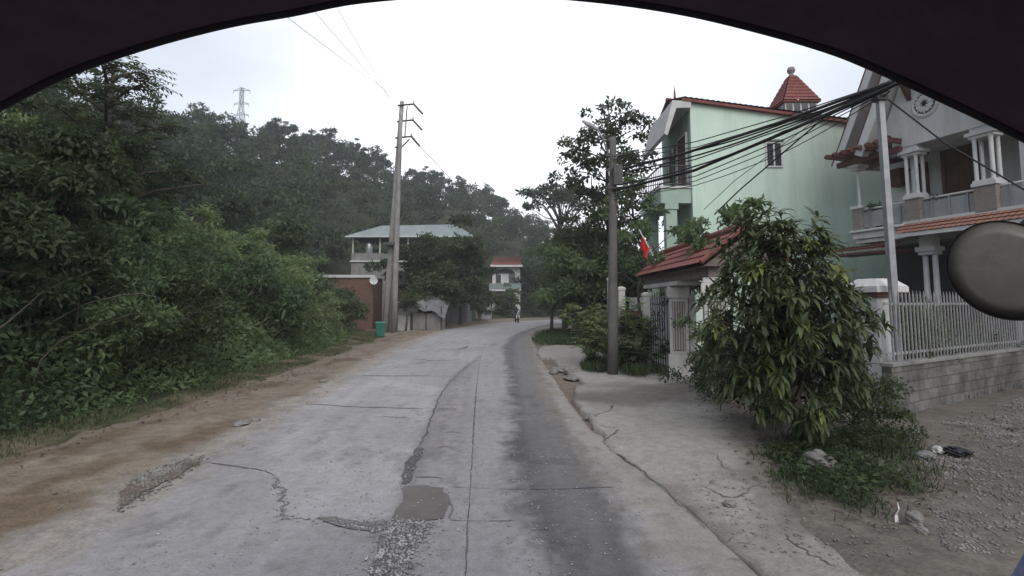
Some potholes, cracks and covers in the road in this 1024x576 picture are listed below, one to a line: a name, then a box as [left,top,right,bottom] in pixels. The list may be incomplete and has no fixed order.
crack [784,532,836,567]
crack [210,462,314,522]
pothole [113,458,200,507]
pothole [354,515,449,576]
crack [703,454,761,497]
crack [395,346,471,448]
pothole [392,485,450,521]
